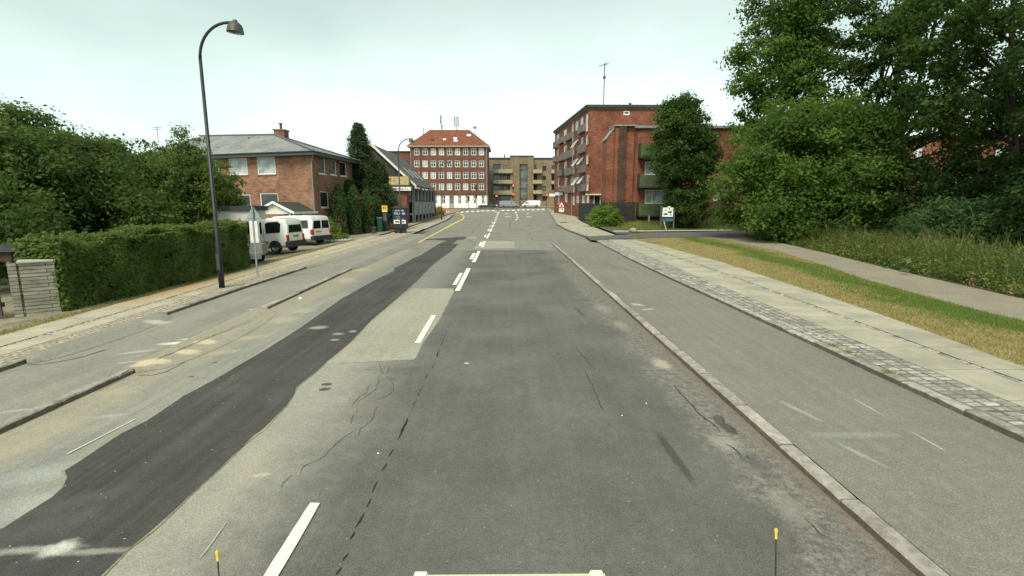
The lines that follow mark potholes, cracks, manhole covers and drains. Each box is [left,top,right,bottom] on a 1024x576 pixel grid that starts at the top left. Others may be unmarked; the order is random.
crack [673,384,749,459]
pothole [713,415,739,435]
